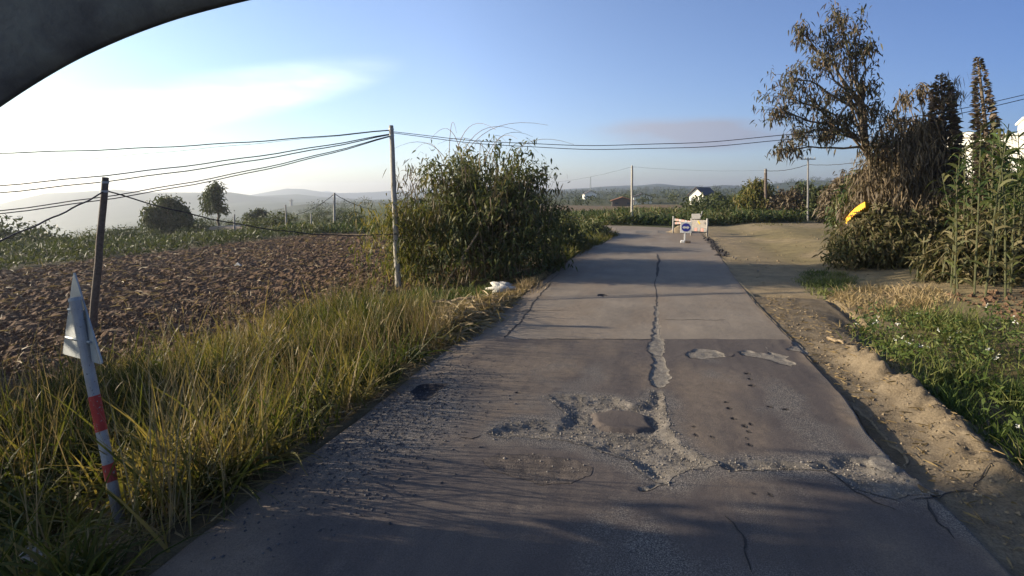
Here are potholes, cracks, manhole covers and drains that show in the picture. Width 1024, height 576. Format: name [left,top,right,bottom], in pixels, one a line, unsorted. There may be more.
pothole [485,390,720,483]
crack [829,471,896,510]
pothole [411,383,449,400]
crack [725,516,752,572]
crack [504,274,558,338]
crack [913,461,996,538]
